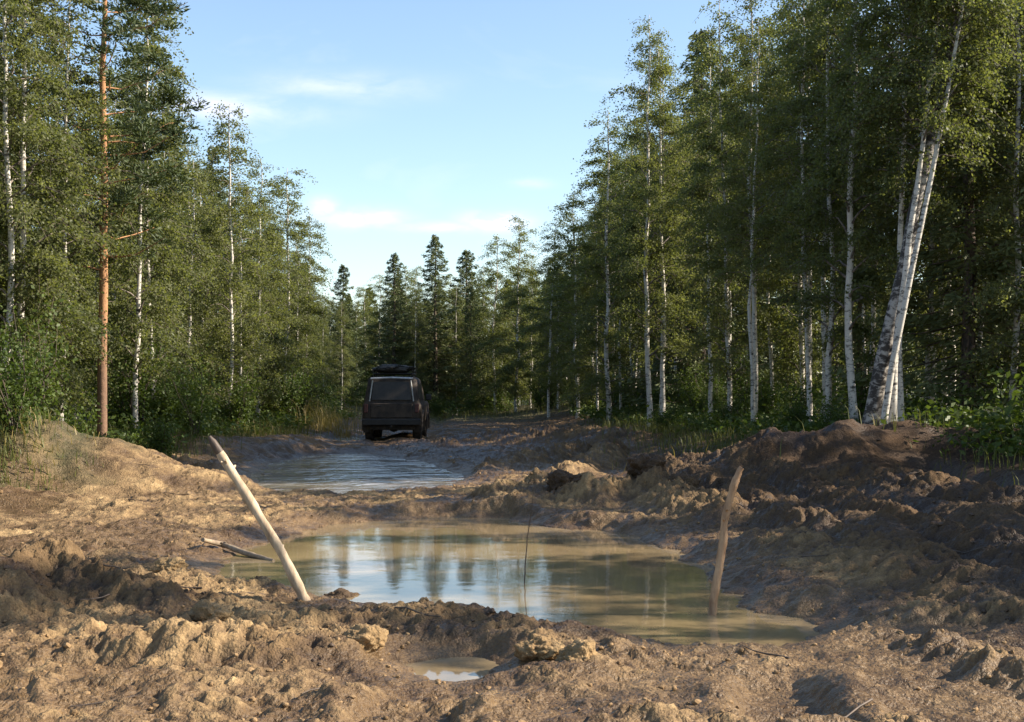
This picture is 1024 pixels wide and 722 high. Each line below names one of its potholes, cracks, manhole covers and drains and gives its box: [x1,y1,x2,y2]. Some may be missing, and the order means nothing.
pothole [245,452,470,494]
pothole [394,650,506,682]
pothole [204,513,831,648]
